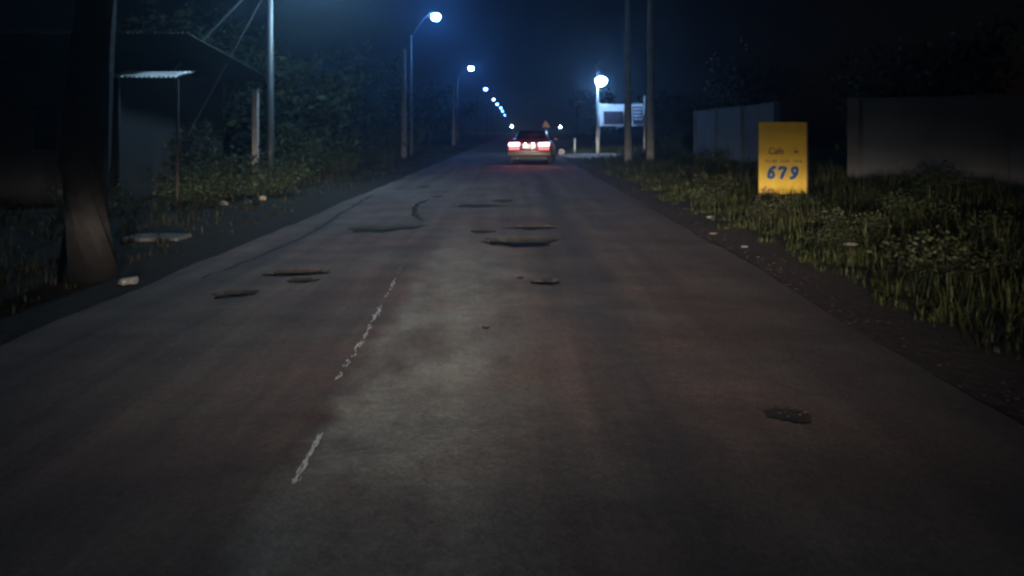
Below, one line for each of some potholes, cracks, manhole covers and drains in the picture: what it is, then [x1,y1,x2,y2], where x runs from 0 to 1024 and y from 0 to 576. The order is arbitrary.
pothole [212,290,260,299]
crack [411,200,427,221]
pothole [261,268,330,277]
pothole [348,225,429,233]
pothole [756,404,813,424]
pothole [479,236,564,248]
